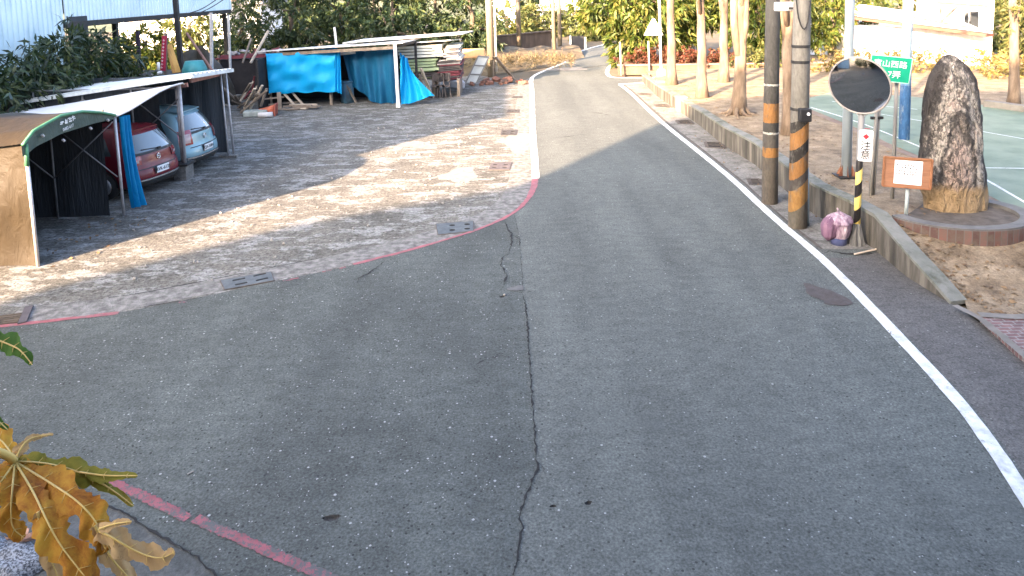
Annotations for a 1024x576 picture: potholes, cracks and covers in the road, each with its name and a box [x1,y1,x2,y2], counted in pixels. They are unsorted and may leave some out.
drain grate [220,271,275,290]
crack [477,224,544,575]
drain grate [704,141,727,149]
